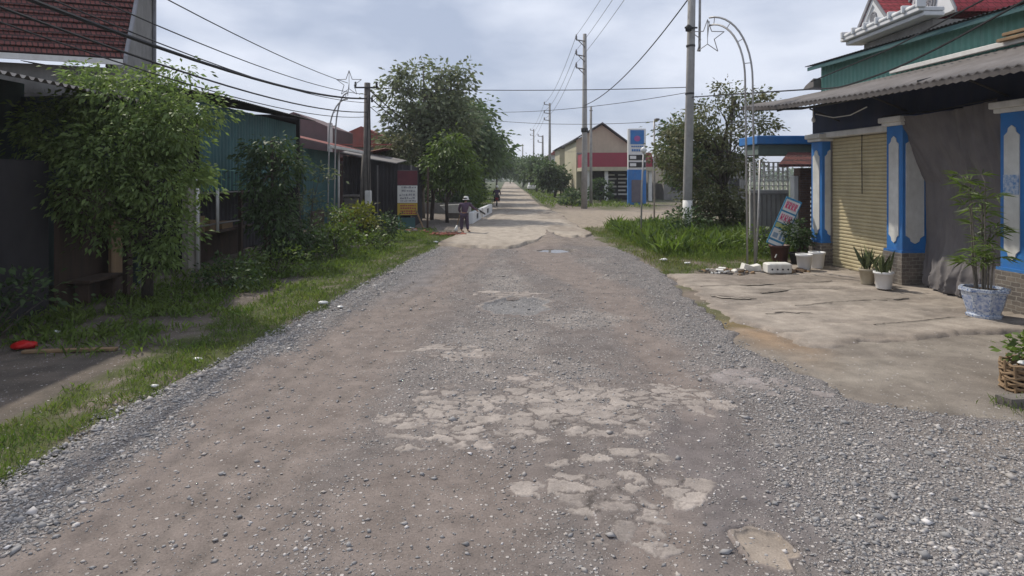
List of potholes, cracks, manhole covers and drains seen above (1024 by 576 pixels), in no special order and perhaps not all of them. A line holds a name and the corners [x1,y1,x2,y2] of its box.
crack [374,343,837,560]
pothole [475,295,555,317]
